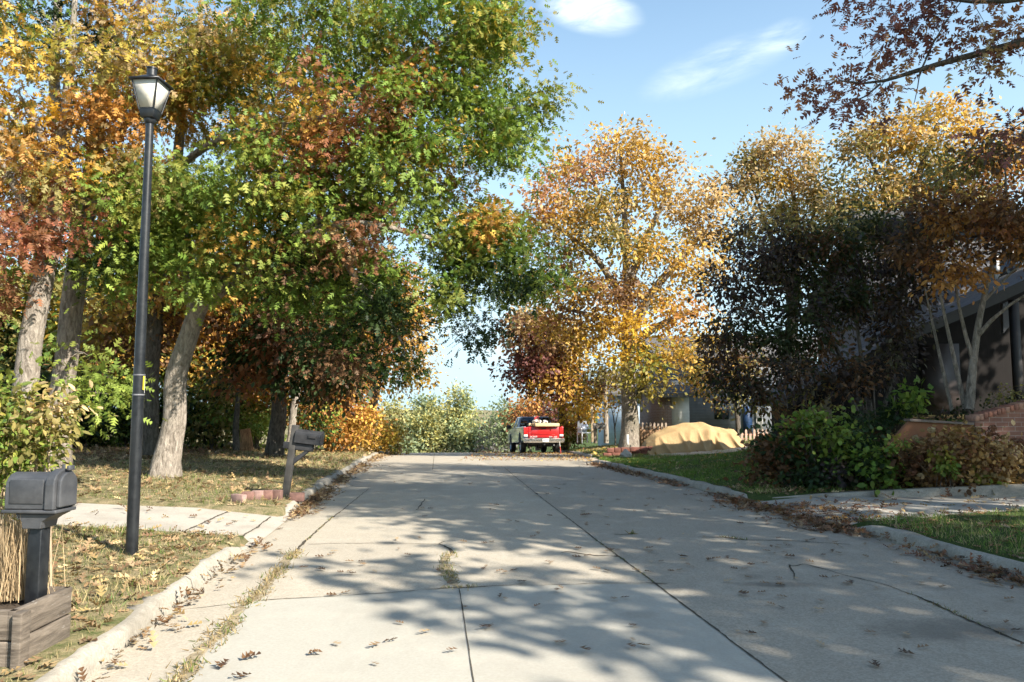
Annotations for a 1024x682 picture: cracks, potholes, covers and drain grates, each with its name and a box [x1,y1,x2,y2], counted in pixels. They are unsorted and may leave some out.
crack [789,564,1024,643]
